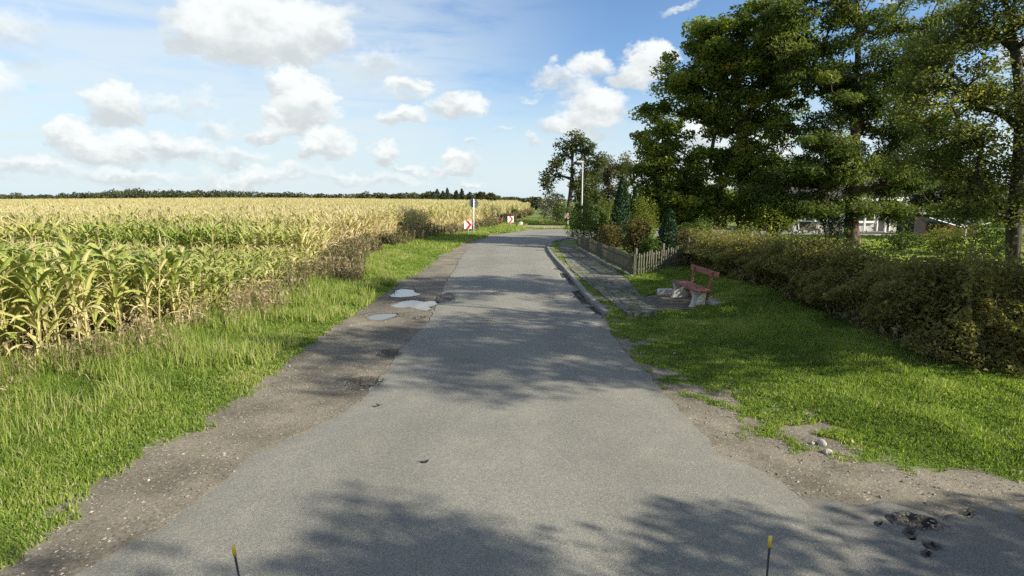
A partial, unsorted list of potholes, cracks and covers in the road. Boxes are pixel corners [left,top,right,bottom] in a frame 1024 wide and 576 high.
pothole [363,312,401,321]
pothole [436,292,456,303]
pothole [386,288,424,297]
pothole [885,511,944,531]
pothole [388,299,440,311]
pothole [344,376,382,390]
pothole [923,541,942,551]
pothole [376,349,401,359]
